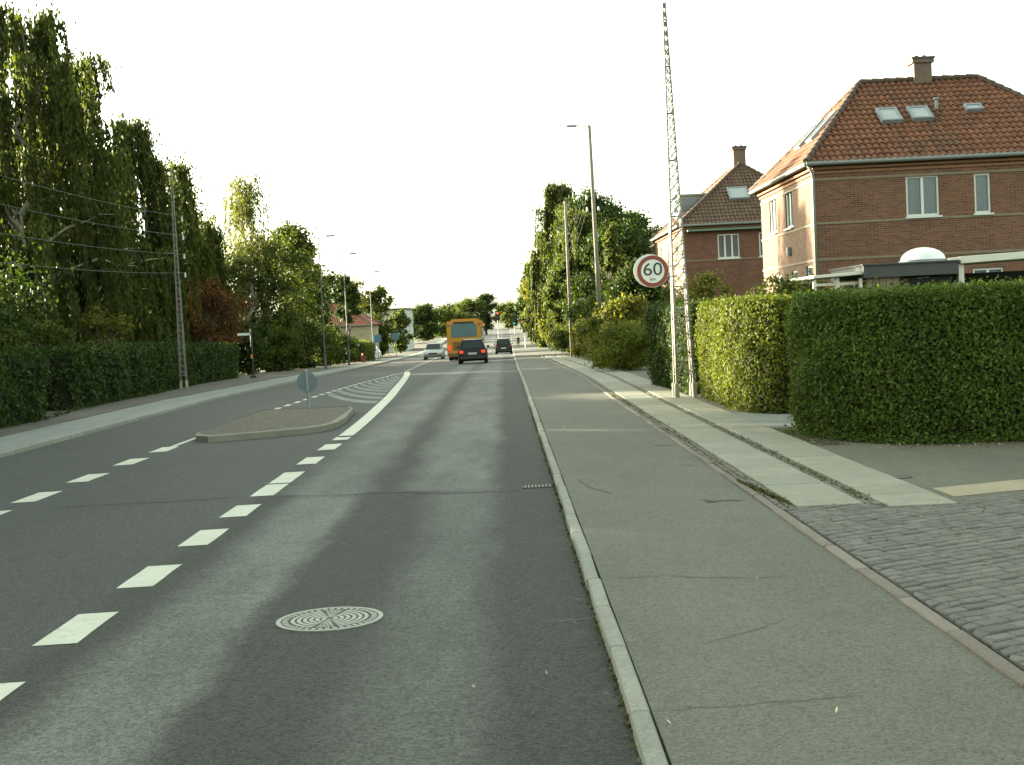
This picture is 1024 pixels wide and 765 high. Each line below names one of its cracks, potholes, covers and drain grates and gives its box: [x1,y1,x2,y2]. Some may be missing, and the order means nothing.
drain grate [522,481,555,489]
manhole cover [276,607,383,632]
crack [658,695,856,711]
